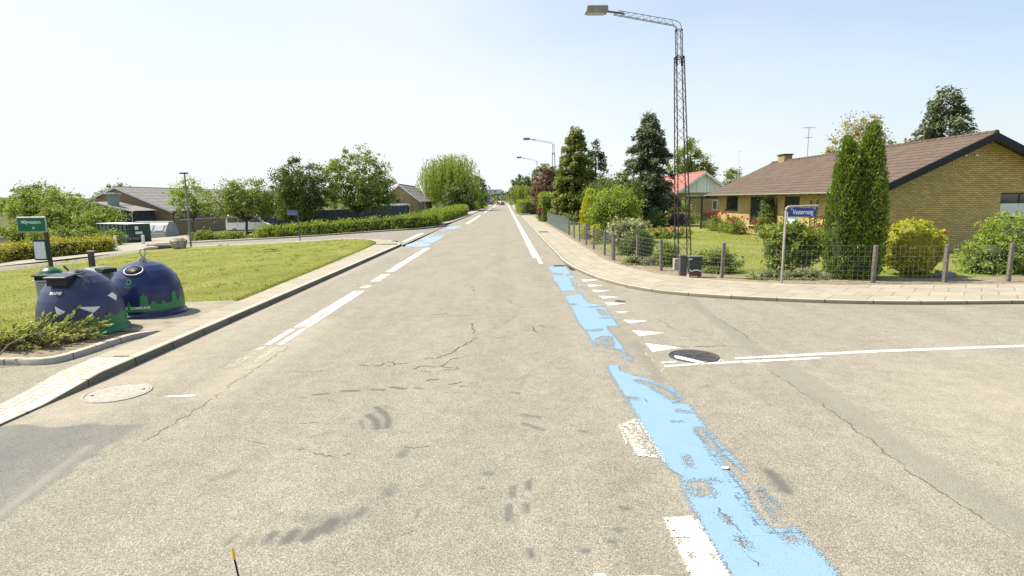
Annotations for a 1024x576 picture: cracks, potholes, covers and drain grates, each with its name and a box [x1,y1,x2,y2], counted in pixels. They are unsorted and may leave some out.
manhole cover [81,383,153,403]
manhole cover [668,349,720,363]
crack [366,286,477,387]
